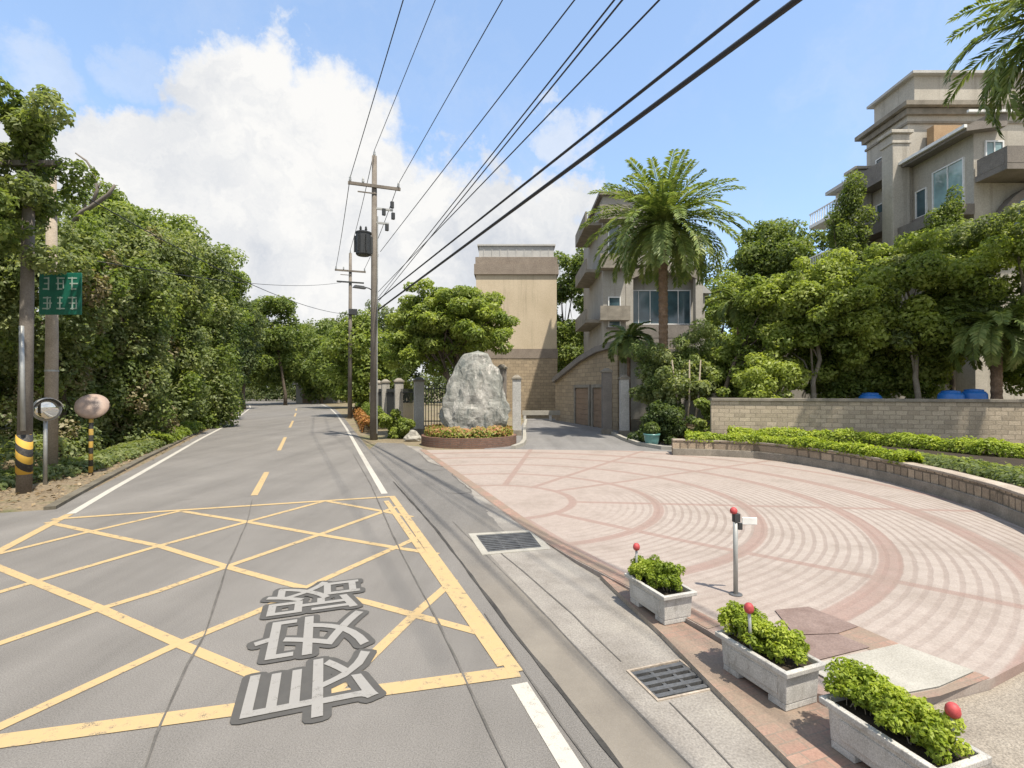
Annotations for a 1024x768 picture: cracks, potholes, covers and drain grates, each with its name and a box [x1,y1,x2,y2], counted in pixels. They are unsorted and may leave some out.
drain grate [469,530,551,555]
drain grate [626,659,711,702]
